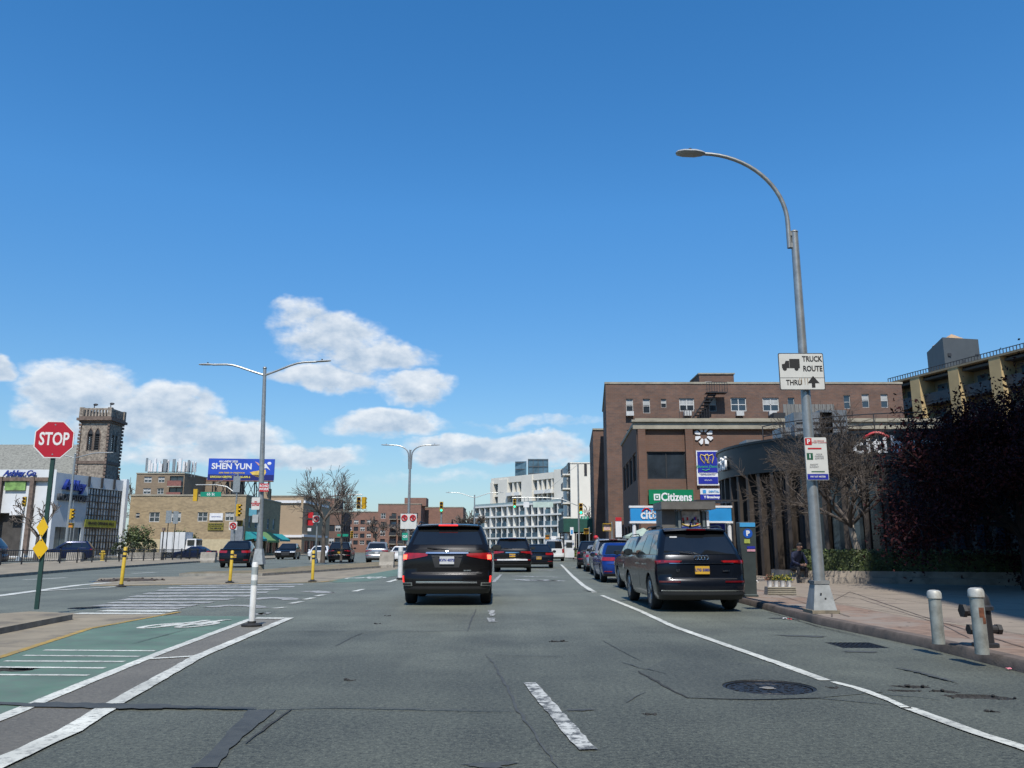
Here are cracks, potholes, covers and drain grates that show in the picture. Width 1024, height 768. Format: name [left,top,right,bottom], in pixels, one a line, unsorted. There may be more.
manhole cover [722,680,817,695]
crack [603,640,903,706]
crack [486,654,560,768]
